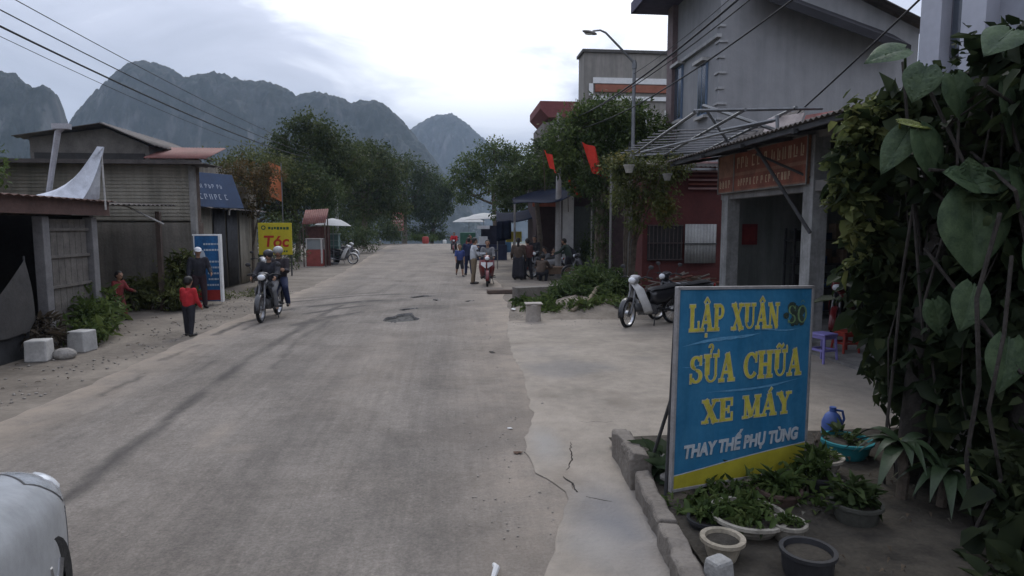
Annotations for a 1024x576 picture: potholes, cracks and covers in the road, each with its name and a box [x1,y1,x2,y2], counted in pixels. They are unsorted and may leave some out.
pothole [383,313,420,323]
crack [563,442,612,502]
